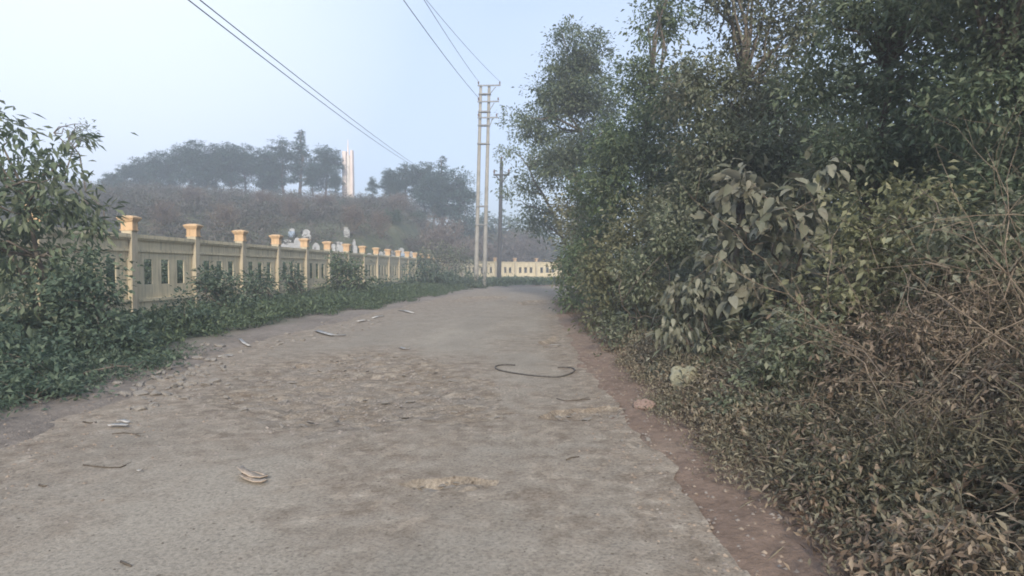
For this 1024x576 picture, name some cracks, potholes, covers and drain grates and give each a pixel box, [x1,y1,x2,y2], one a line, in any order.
pothole [538,406,626,422]
pothole [397,476,500,492]
